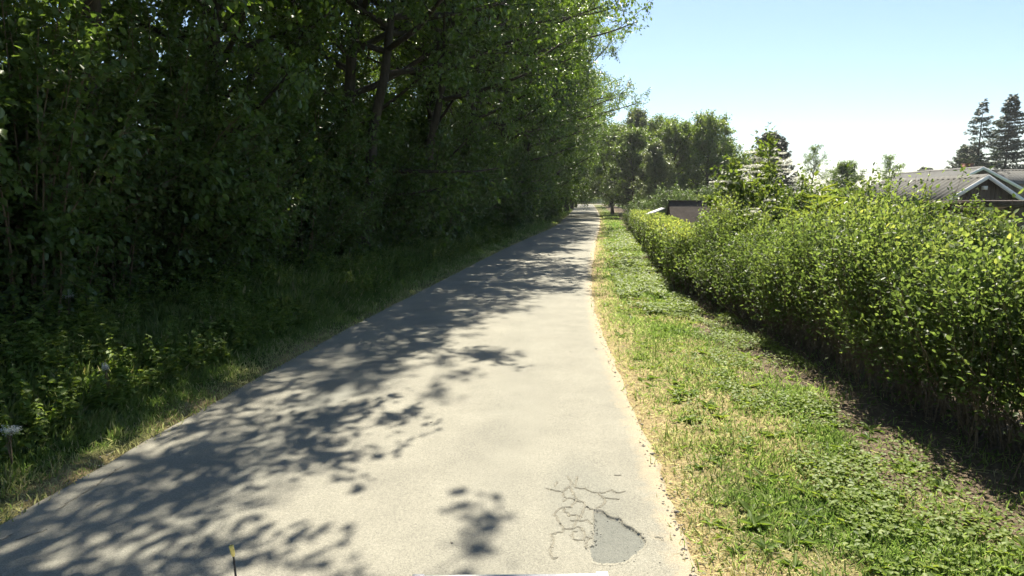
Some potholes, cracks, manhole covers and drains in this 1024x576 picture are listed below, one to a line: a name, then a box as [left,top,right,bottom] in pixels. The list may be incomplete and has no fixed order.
pothole [586,508,648,566]
crack [546,475,625,559]
